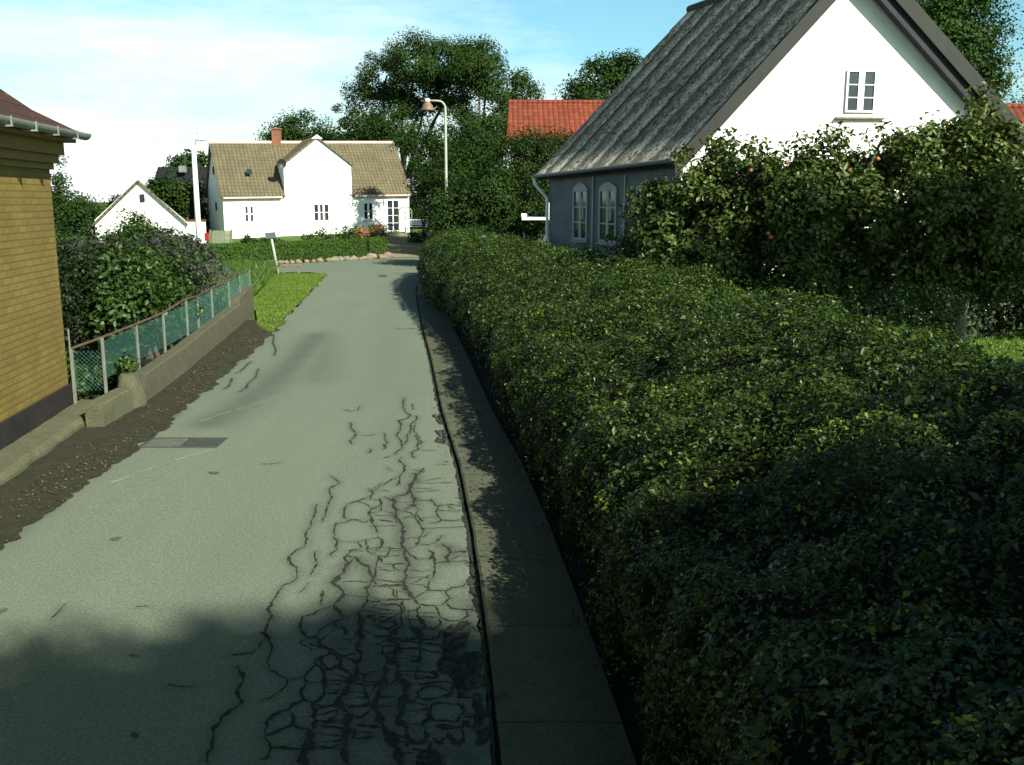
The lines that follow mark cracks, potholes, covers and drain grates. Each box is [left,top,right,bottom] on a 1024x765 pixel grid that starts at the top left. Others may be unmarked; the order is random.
crack [206,392,487,765]
crack [224,335,277,392]
